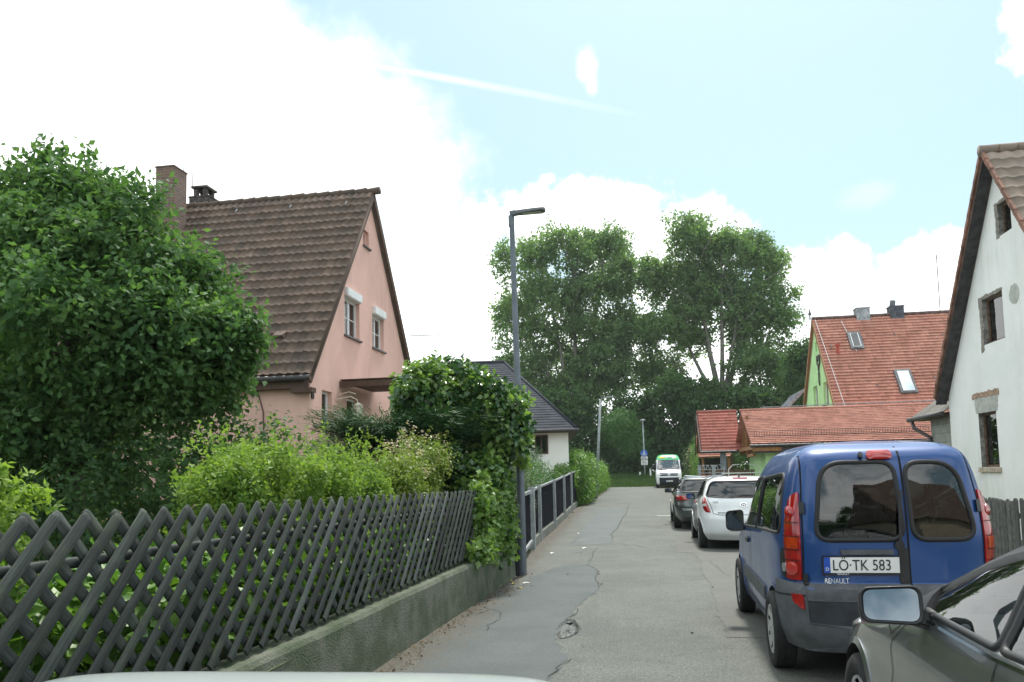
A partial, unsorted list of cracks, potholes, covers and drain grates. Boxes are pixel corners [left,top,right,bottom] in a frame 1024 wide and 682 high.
pothole [556,620,579,639]
crack [546,608,583,681]
